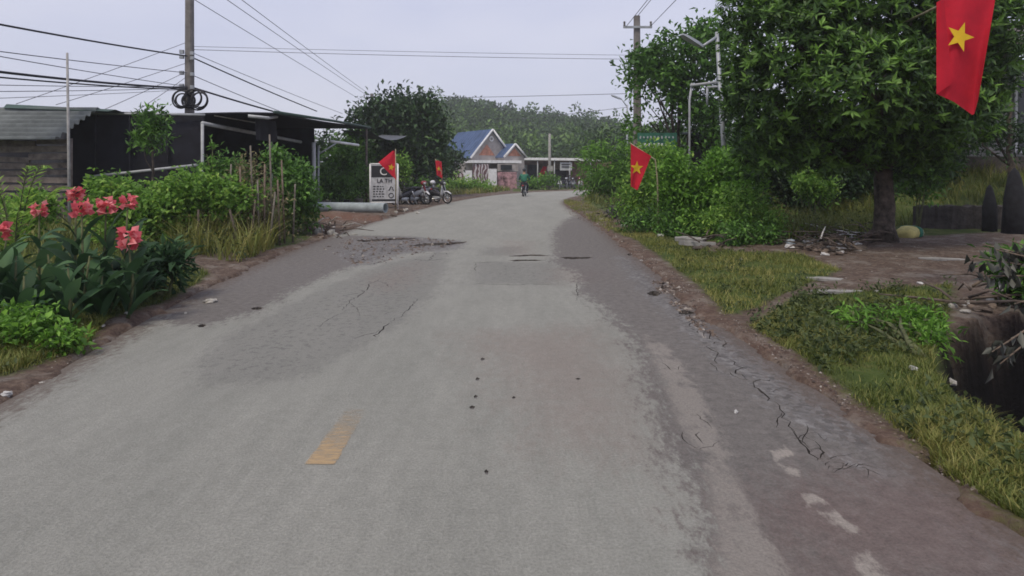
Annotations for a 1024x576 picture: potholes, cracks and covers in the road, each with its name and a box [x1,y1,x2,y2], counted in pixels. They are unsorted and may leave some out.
crack [319,243,403,327]
crack [671,294,880,475]
